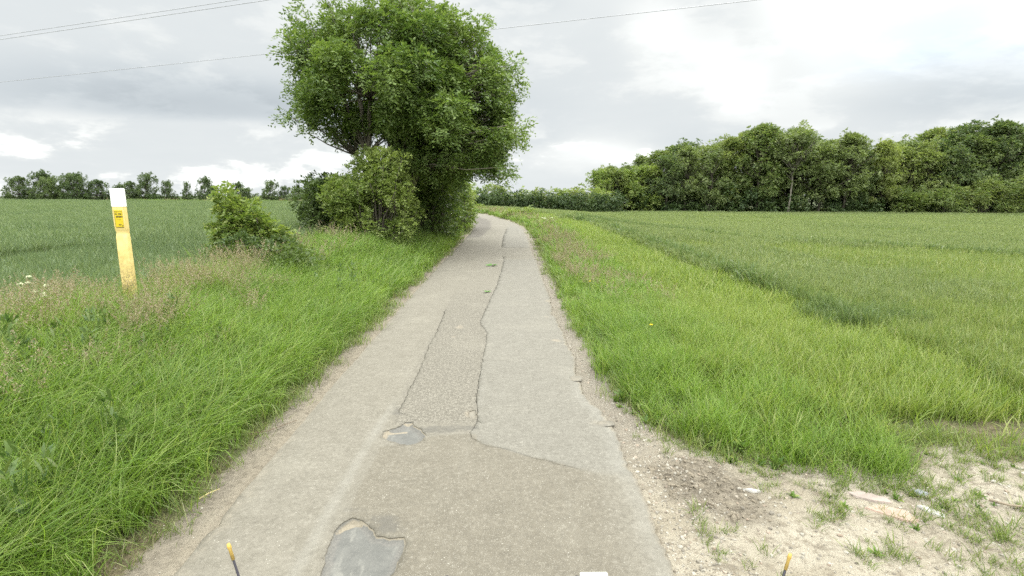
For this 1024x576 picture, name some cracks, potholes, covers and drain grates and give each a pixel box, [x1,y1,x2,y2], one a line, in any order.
pothole [321,519,406,576]
pothole [382,423,426,445]
